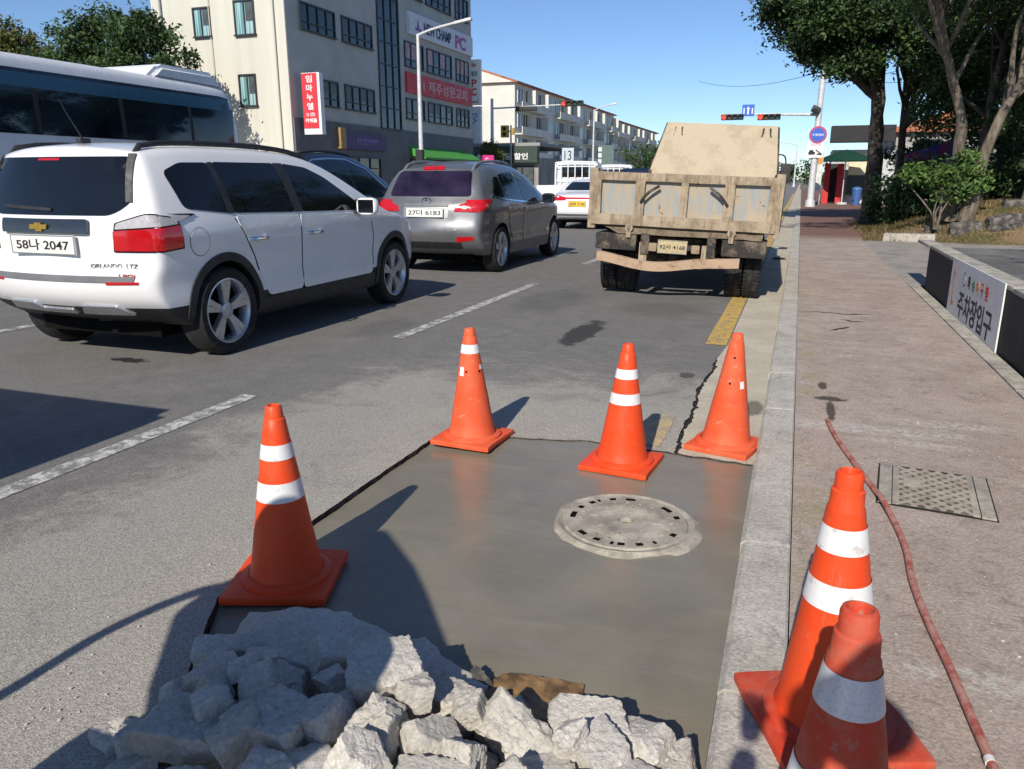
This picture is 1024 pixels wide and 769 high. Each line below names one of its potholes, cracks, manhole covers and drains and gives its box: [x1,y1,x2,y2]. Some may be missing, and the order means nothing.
crack [674,357,718,454]
manhole cover [554,494,702,559]
